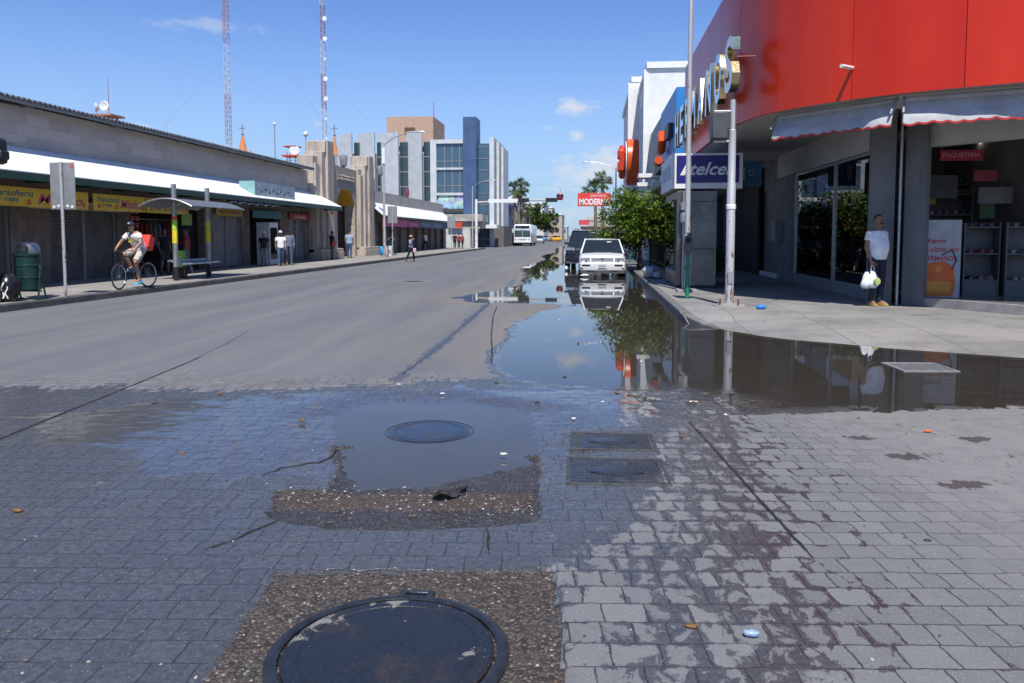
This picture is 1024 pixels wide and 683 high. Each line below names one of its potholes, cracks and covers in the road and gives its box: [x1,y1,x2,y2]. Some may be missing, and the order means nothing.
crack [262,449,337,476]
manhole cover [385,420,474,443]
crack [205,519,280,550]
manhole cover [262,589,510,683]
